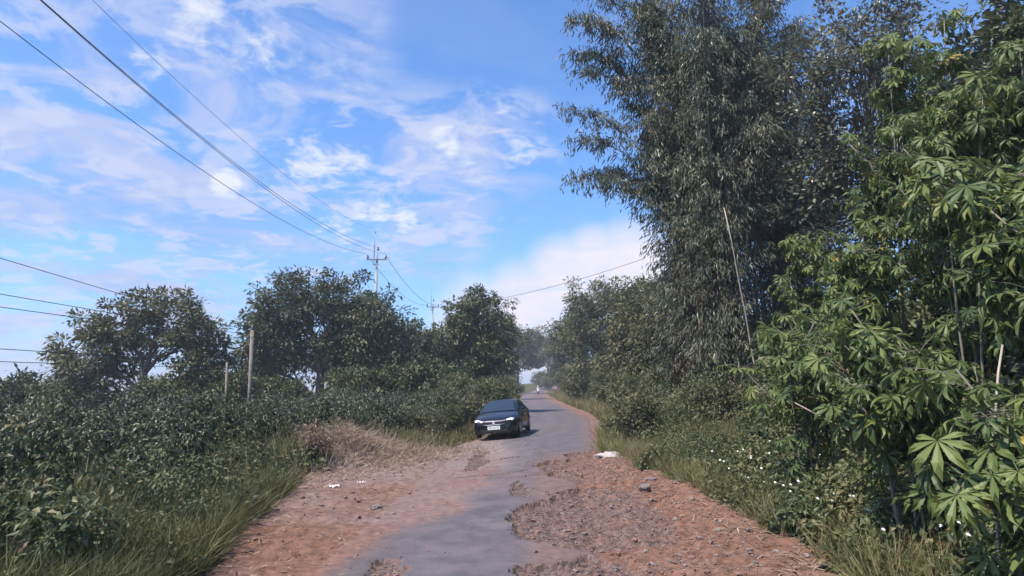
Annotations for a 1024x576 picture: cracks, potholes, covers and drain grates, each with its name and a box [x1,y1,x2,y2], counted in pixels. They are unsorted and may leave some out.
pothole [363,558,412,576]
pothole [464,450,491,471]
pothole [508,481,532,498]
pothole [504,487,682,552]
